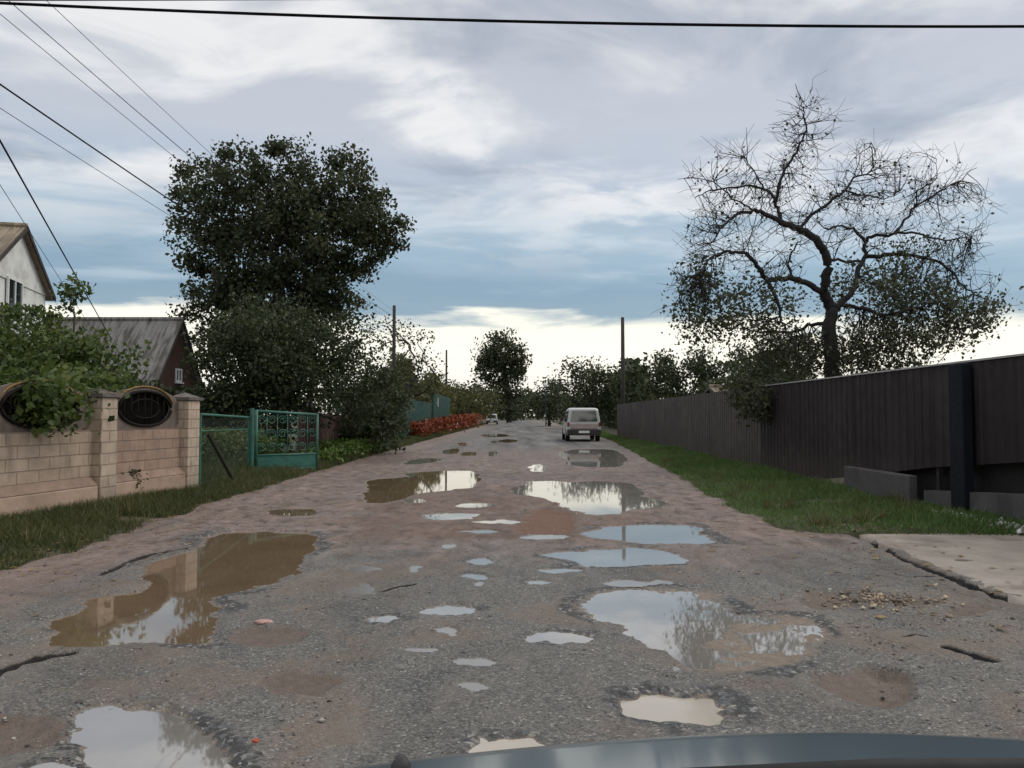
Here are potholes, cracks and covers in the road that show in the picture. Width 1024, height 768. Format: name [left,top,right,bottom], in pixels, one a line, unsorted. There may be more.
crack [377,580,435,597]
crack [75,547,188,581]
crack [837,534,1024,671]
pothole [574,676,782,738]
crack [0,647,110,687]
pothole [515,543,726,571]
pothole [568,520,742,548]
pothole [545,448,642,469]
pothole [339,469,500,505]
pothole [535,582,869,686]
pothole [0,526,346,662]
